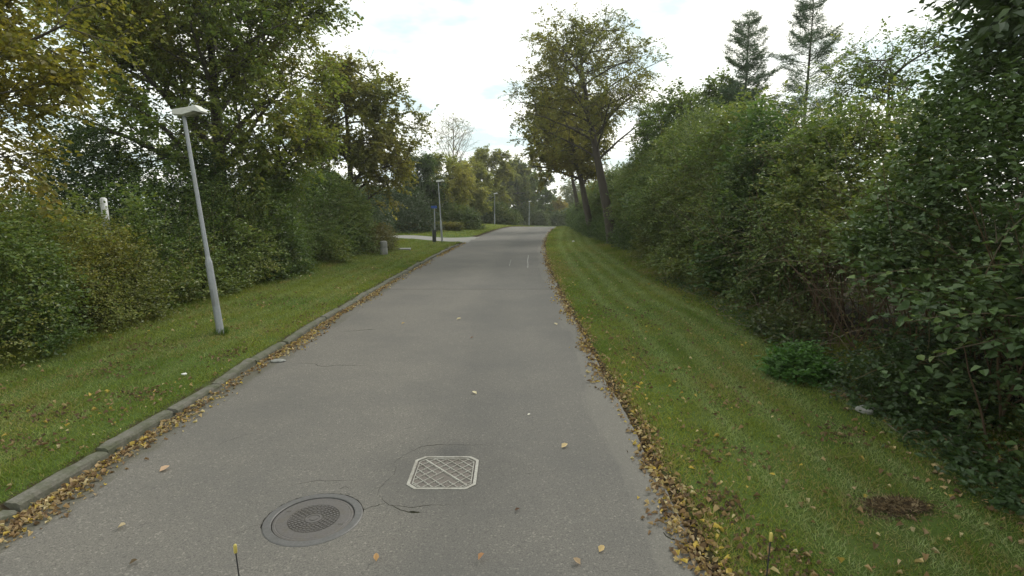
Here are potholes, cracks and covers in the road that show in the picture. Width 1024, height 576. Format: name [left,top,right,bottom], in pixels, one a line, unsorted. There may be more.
crack [296,444,459,513]
manhole cover [260,493,364,547]
